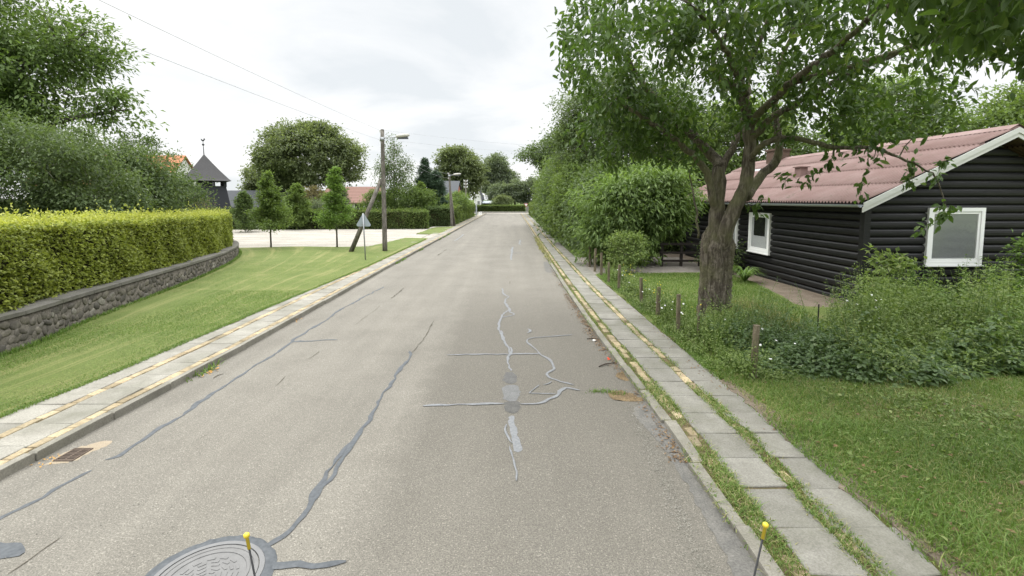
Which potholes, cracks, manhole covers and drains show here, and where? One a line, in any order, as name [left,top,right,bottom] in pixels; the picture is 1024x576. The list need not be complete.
manhole cover [145,535,277,576]
drain grate [42,441,112,466]
